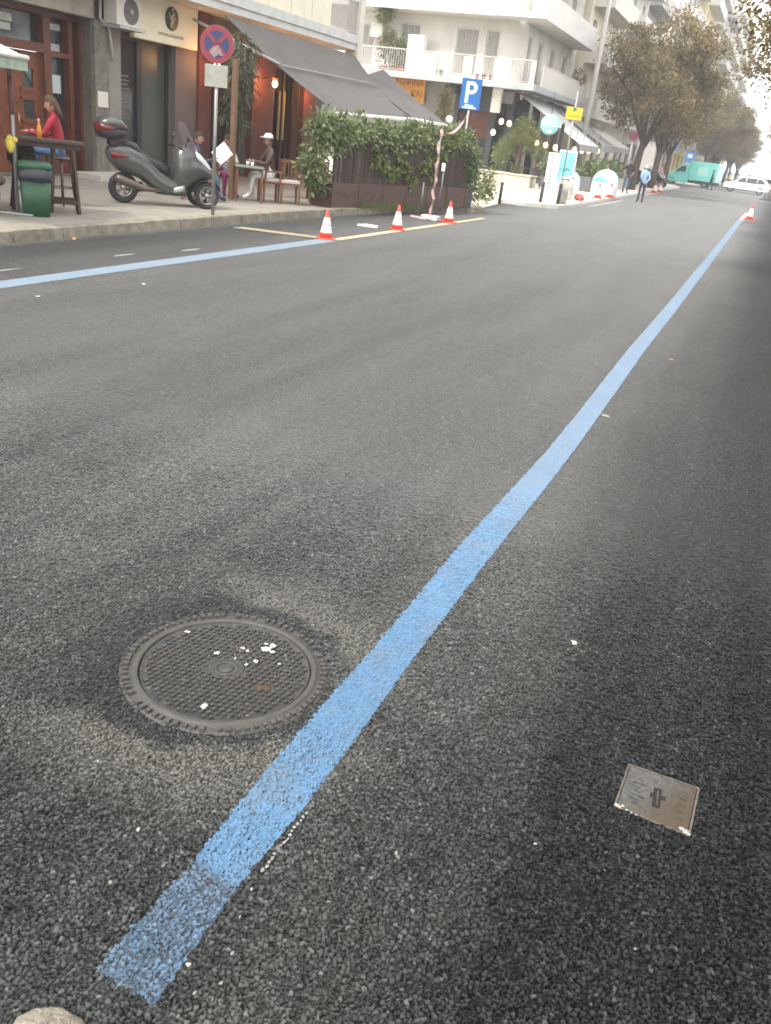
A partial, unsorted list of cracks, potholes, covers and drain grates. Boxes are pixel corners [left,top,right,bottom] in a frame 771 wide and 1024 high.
manhole cover [118,613,329,736]
manhole cover [614,763,700,836]
